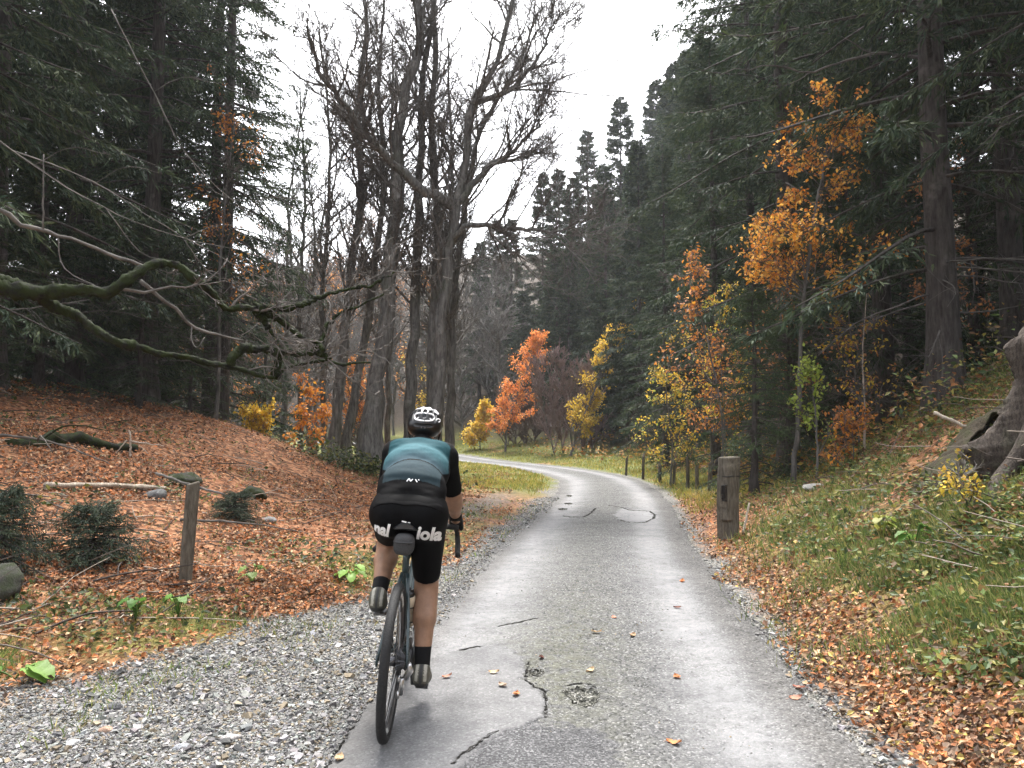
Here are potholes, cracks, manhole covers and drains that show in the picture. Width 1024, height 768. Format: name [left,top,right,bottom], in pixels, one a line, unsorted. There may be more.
crack [524,661,548,718]
pothole [563,685,600,707]
crack [564,505,656,523]
